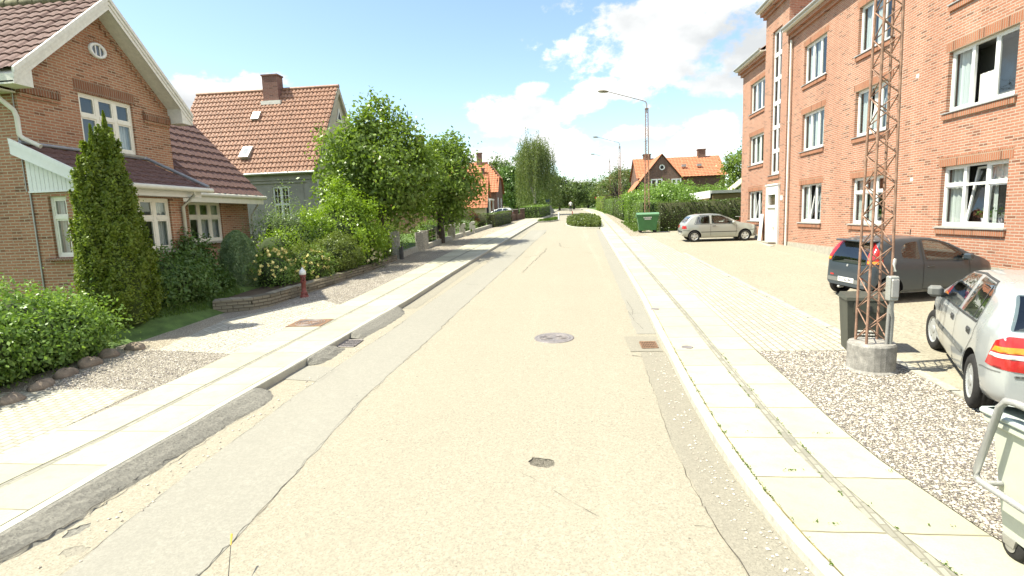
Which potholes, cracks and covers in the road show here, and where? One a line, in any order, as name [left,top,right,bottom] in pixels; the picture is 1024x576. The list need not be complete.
pothole [528,457,555,468]
drain grate [639,341,659,349]
drain grate [337,339,363,347]
manhole cover [534,333,574,343]
manhole cover [285,319,333,327]
